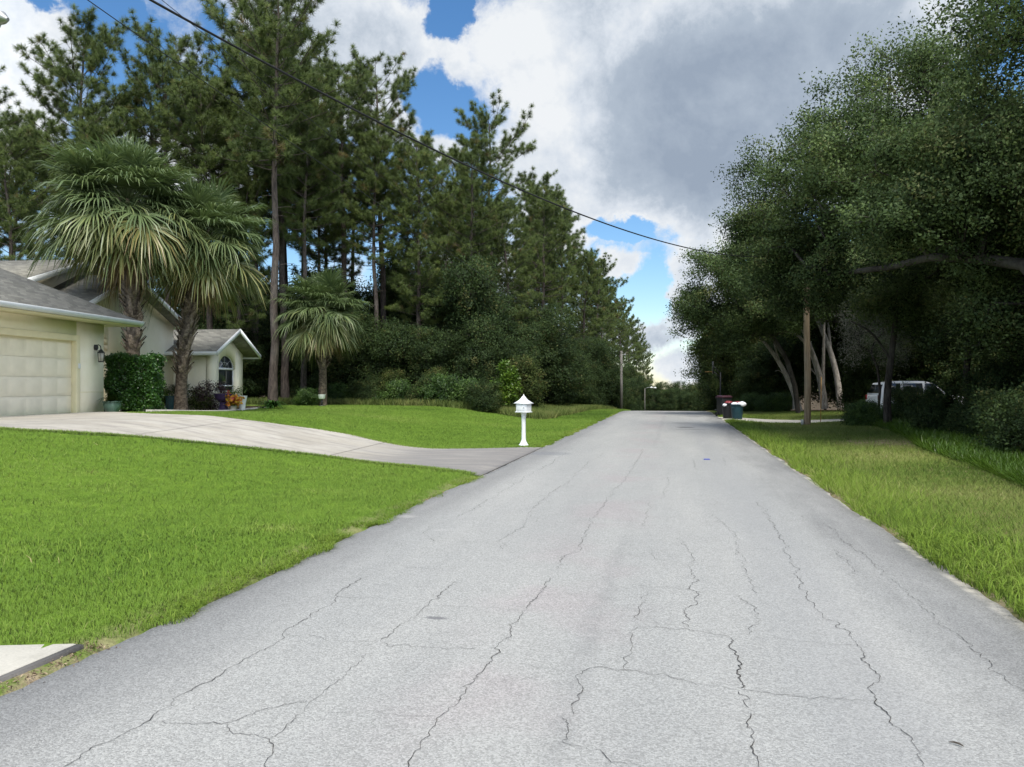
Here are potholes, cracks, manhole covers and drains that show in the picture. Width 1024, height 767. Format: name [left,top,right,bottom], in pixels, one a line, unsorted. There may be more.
crack [65,567,548,767]
crack [834,531,1022,689]
crack [705,503,924,766]
crack [563,541,731,764]
